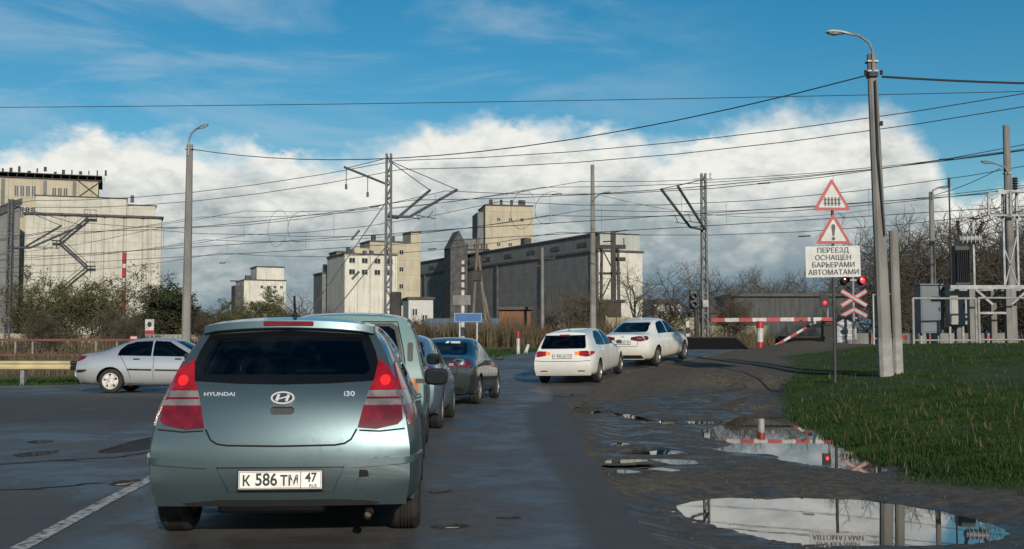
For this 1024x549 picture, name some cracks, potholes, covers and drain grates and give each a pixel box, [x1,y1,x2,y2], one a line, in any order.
pothole [601,459,659,468]
pothole [650,458,704,466]
